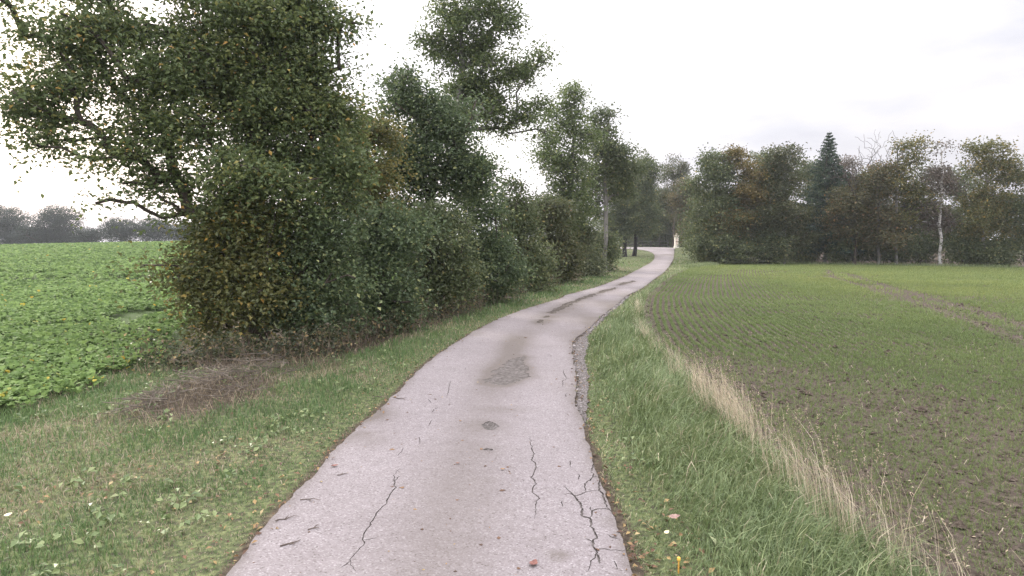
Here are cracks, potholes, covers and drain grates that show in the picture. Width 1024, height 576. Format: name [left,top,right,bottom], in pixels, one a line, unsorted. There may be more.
pothole [482,421,500,430]
crack [530,443,540,519]
crack [561,460,625,571]
crack [340,382,451,571]
